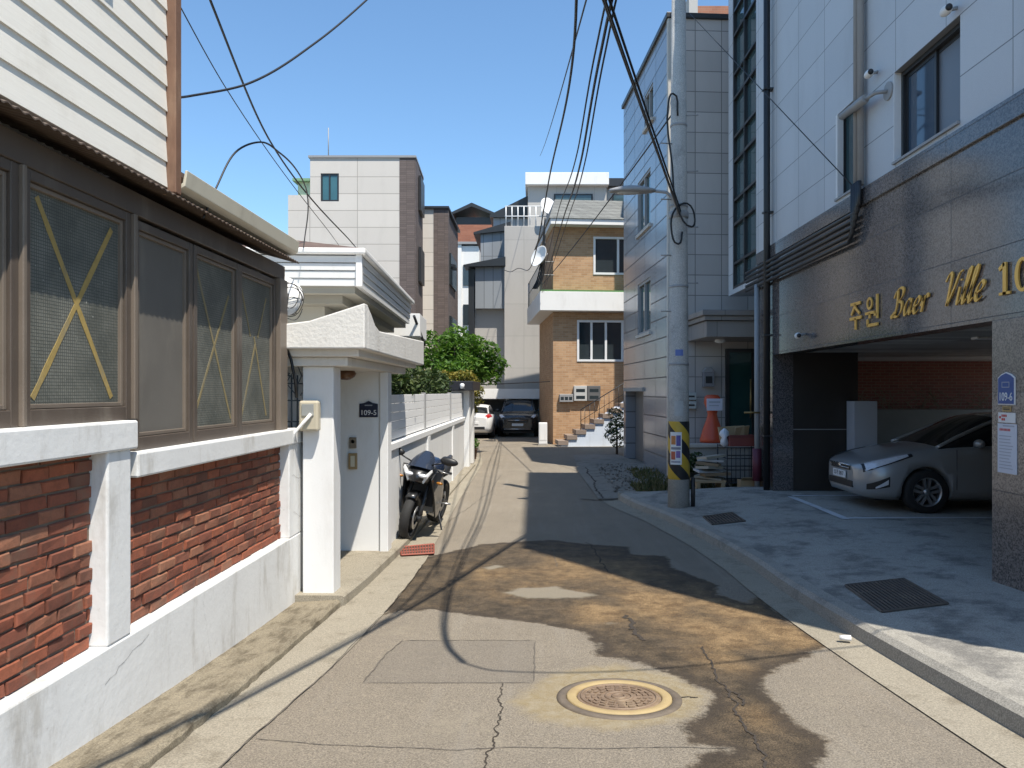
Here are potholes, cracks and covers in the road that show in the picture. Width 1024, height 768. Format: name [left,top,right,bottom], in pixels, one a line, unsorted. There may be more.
crack [623,615,645,640]
crack [684,646,768,768]
drain grate [844,578,949,613]
drain grate [702,512,746,525]
crack [484,683,504,768]
drain grate [400,543,435,556]
manhole cover [557,678,682,720]
